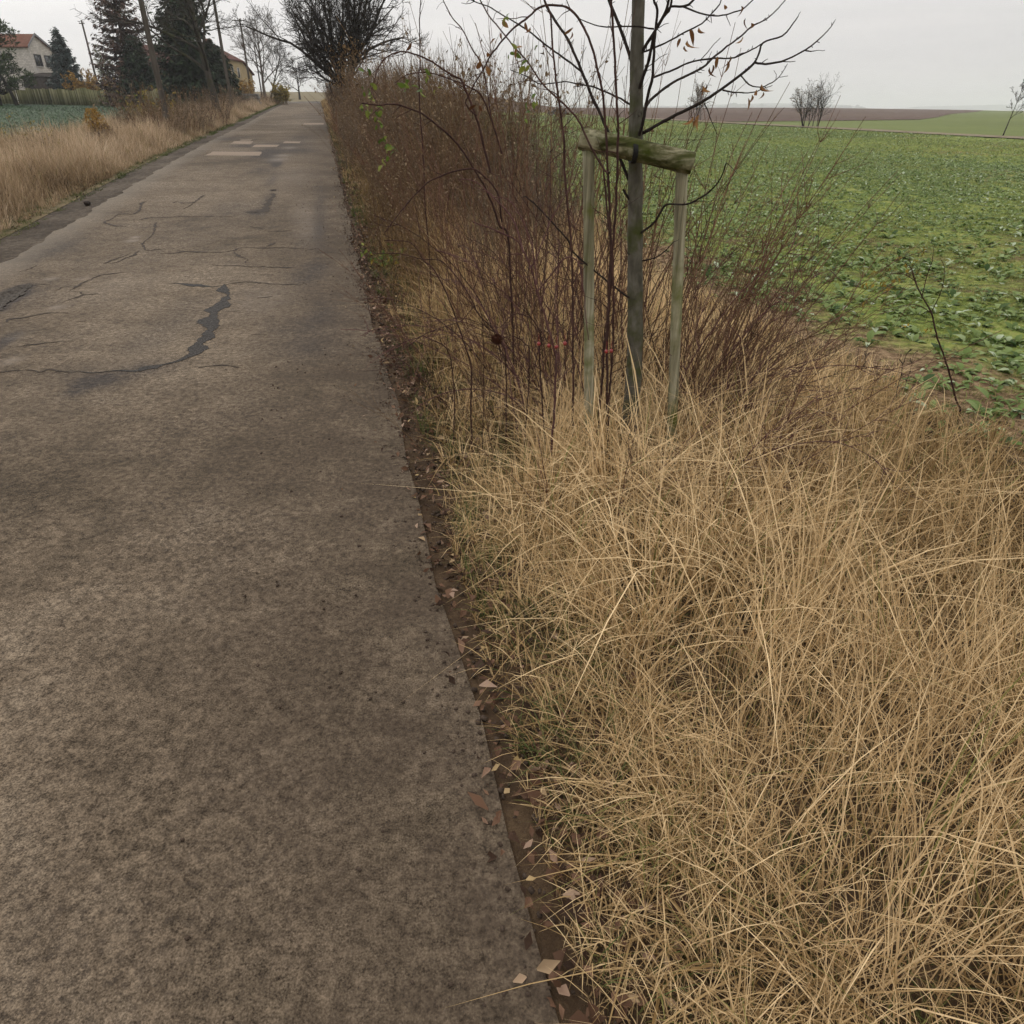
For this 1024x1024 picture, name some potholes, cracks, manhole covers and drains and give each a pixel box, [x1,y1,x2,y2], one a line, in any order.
crack [6,193,341,322]
